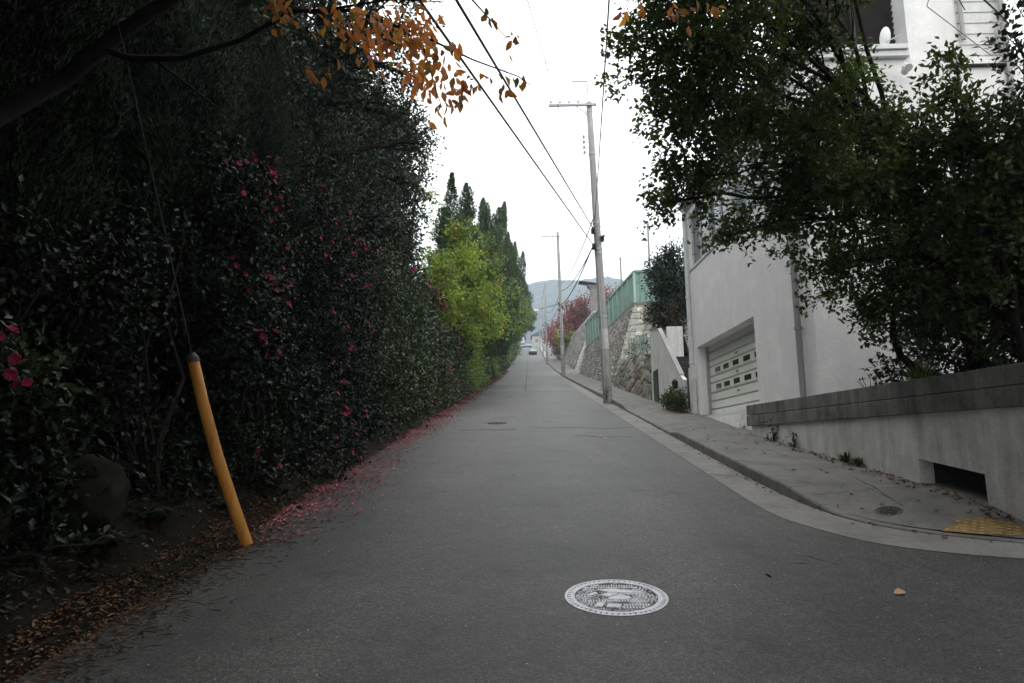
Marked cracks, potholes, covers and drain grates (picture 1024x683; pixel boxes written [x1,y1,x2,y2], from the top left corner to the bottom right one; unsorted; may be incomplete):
manhole cover [564,579,670,616]
